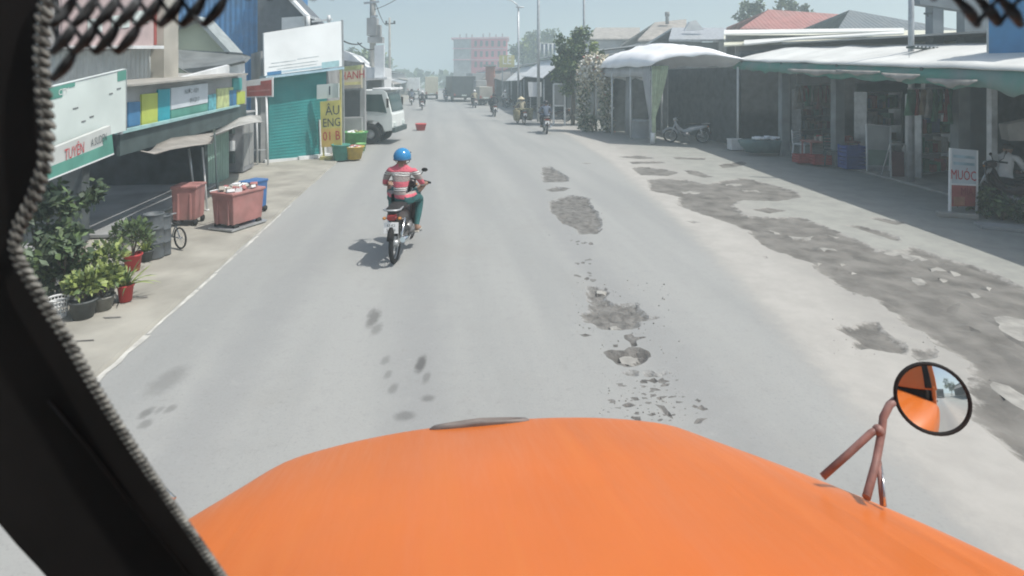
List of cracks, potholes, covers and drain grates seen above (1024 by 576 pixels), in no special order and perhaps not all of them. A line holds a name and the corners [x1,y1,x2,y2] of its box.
pothole [621,369,668,378]
pothole [540,166,570,182]
pothole [646,178,1024,463]
pothole [603,347,651,367]
pothole [575,286,661,330]
pothole [548,195,603,234]
